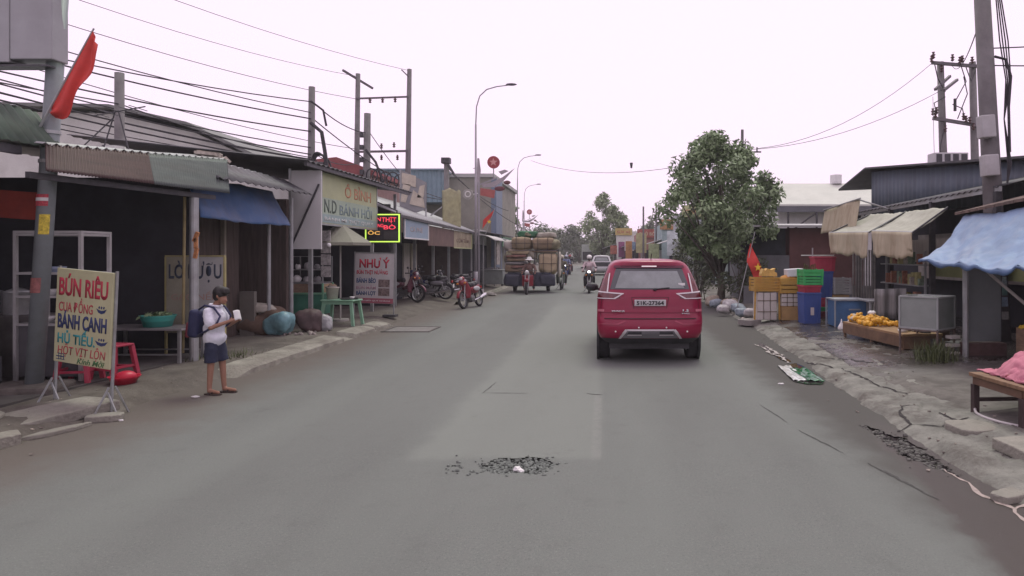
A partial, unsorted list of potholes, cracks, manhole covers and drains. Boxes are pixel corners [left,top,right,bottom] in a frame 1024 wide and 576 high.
pothole [860,425,961,477]
crack [799,349,968,431]
pothole [445,455,566,477]
